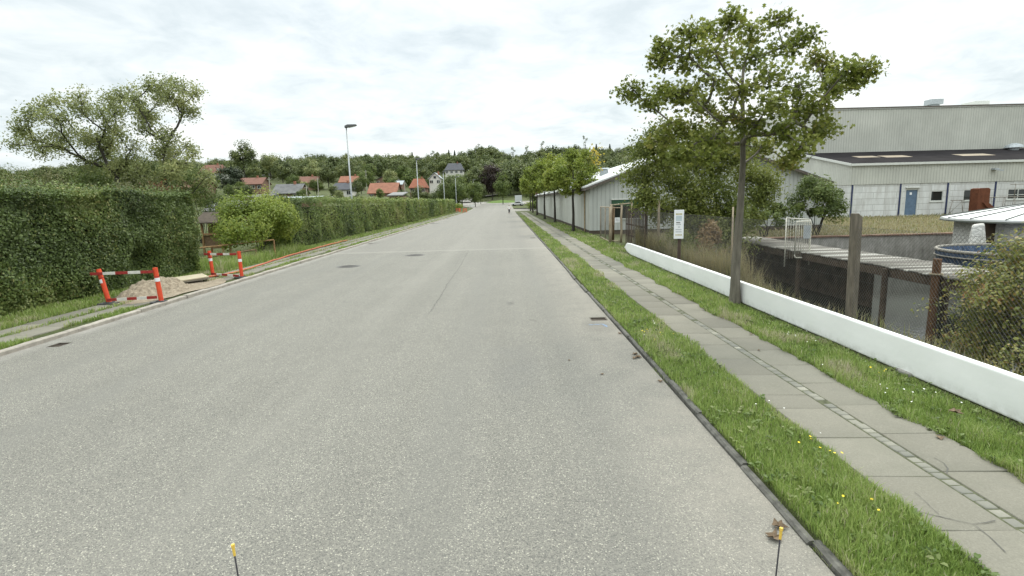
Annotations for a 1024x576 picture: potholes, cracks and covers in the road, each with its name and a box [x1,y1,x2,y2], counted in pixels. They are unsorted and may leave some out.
crack [915,492,1006,552]
